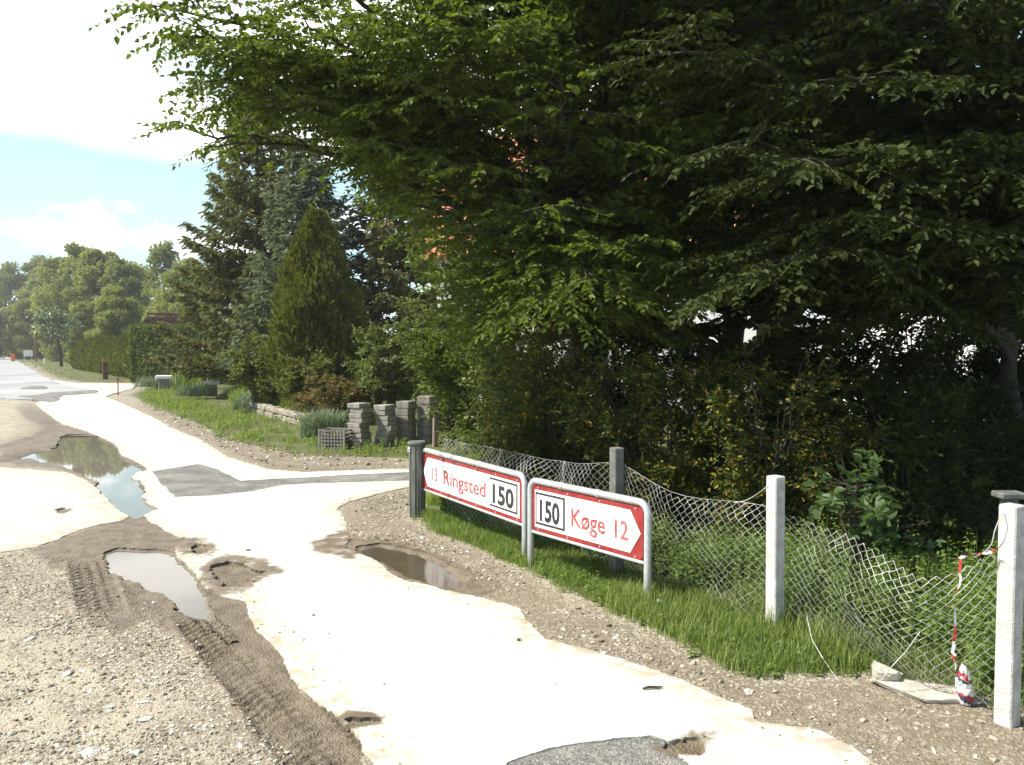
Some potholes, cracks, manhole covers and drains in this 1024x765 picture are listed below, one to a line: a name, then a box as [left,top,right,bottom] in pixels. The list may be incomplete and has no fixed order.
pothole [210,564,263,587]
pothole [345,720,381,731]
pothole [356,544,470,588]
pothole [664,740,705,756]
pothole [100,549,240,644]
